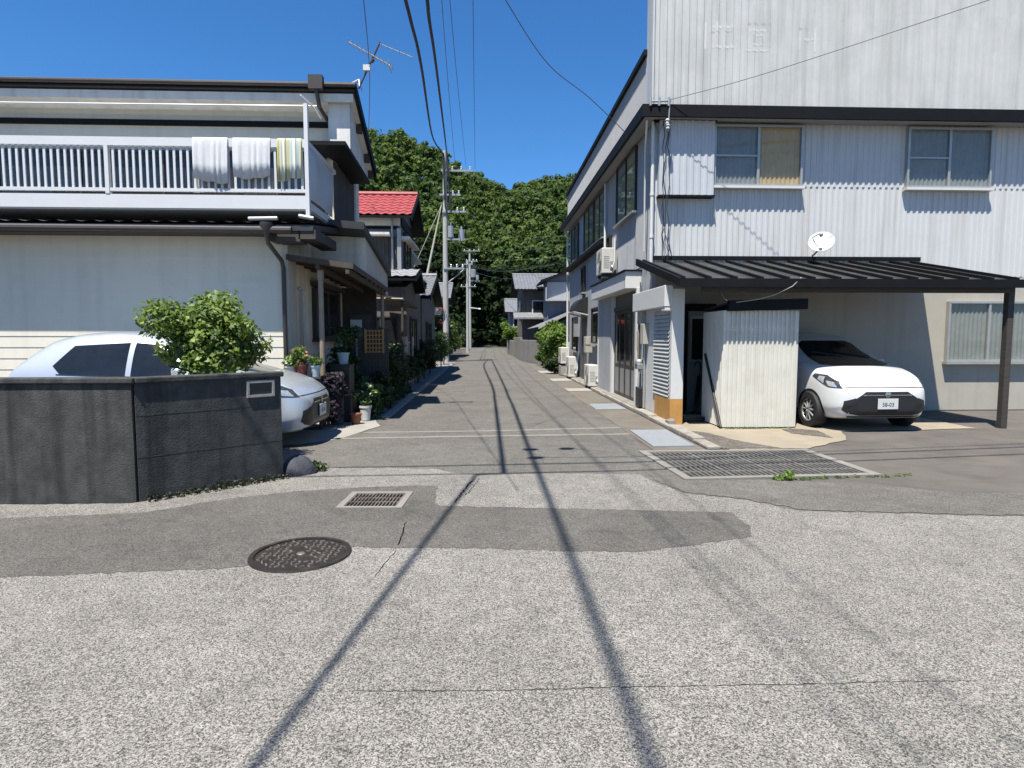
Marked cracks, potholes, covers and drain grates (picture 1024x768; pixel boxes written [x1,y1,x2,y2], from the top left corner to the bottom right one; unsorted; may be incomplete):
drain grate [335,491,413,508]
manhole cover [247,537,352,573]
crack [375,522,407,576]
drain grate [638,449,883,480]
